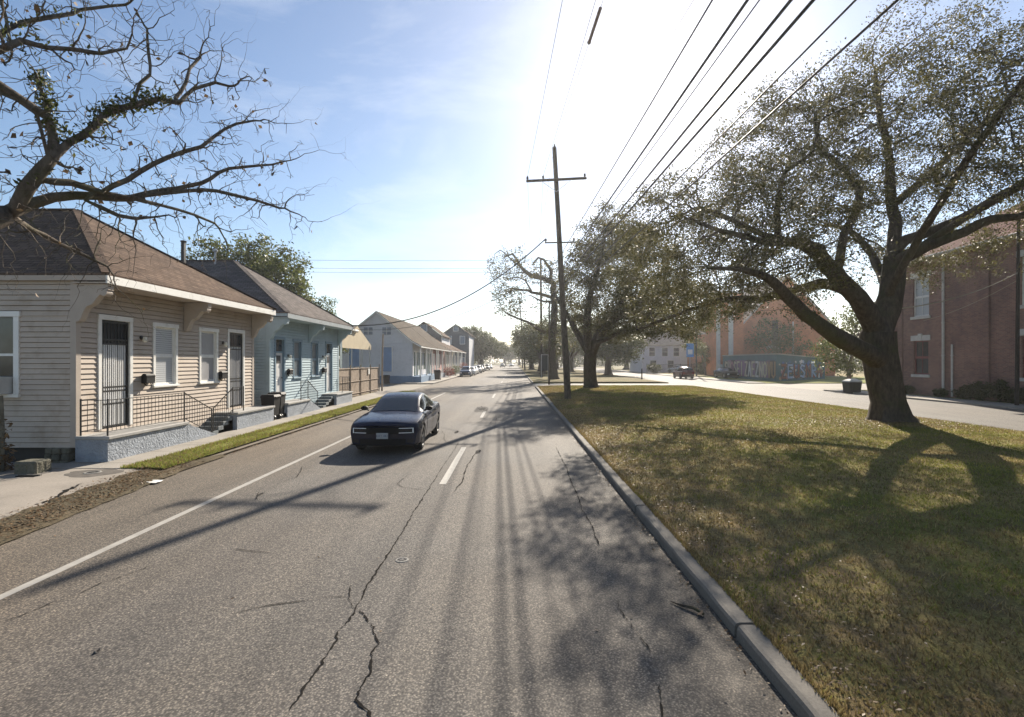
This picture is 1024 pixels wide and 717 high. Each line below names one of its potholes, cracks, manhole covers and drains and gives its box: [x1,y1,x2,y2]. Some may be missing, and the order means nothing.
crack [556,447,599,544]
crack [232,453,476,717]
